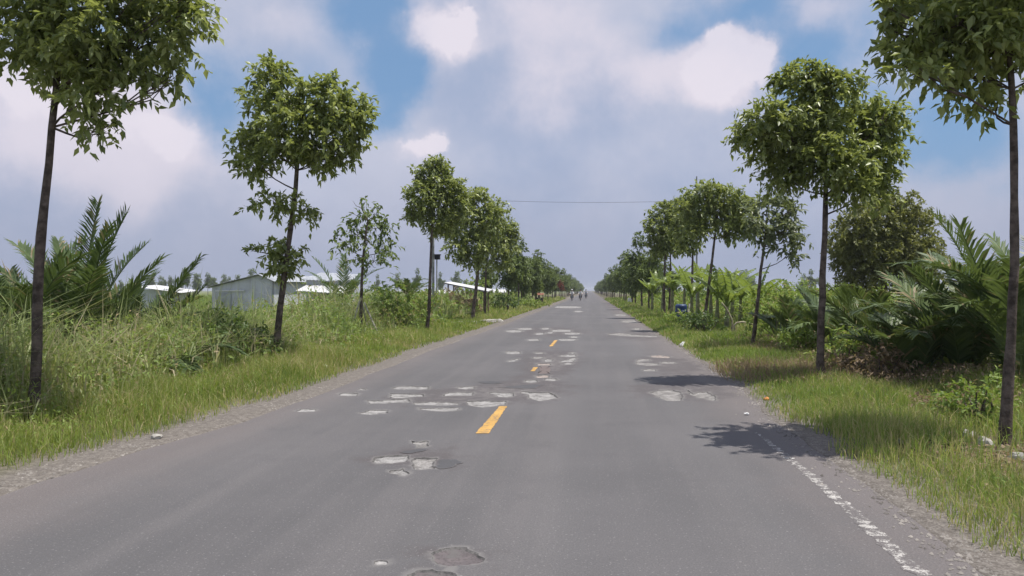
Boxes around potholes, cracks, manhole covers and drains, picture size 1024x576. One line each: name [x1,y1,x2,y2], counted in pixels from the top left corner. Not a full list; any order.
pothole [650,390,684,401]
pothole [431,547,485,566]
pothole [520,391,558,401]
pothole [411,457,438,469]
pothole [687,390,716,401]
pothole [371,455,410,463]
